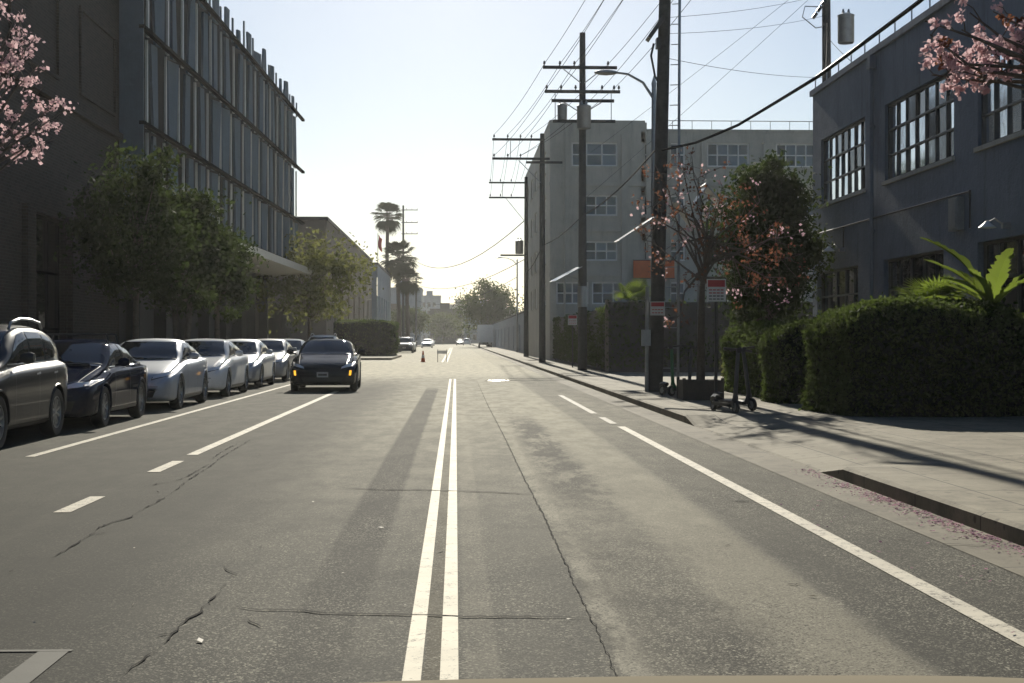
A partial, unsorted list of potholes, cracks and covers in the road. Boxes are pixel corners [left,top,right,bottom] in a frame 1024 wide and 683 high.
crack [126,566,574,672]
crack [56,442,245,555]
